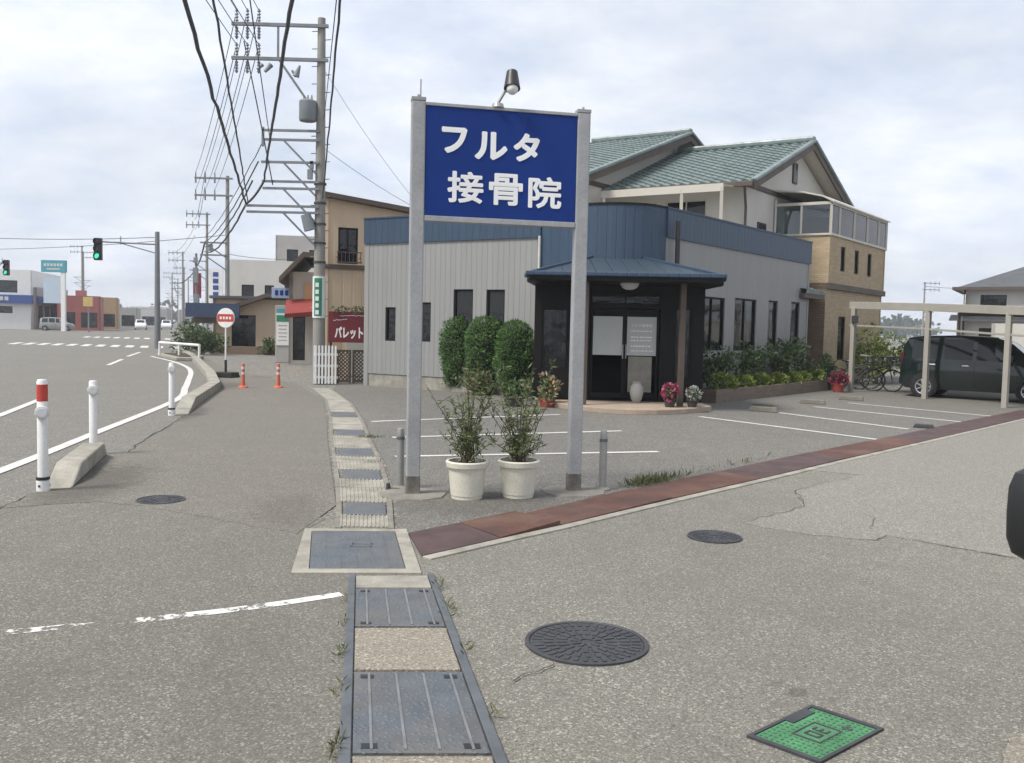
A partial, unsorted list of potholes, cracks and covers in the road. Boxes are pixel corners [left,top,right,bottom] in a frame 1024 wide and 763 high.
manhole cover [135,495,186,504]
manhole cover [525,621,649,667]
manhole cover [687,530,742,544]
utility cover [747,704,884,763]
